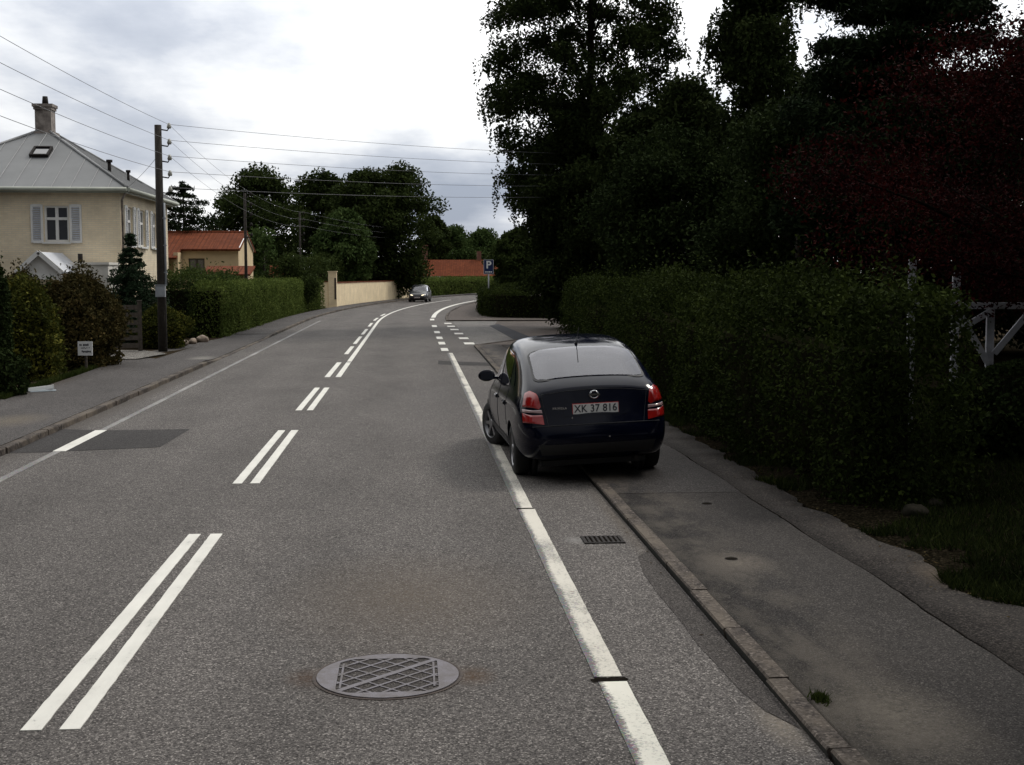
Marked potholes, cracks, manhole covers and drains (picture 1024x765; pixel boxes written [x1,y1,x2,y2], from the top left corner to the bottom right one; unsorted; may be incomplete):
manhole cover [312,653,463,700]
drain grate [580,535,626,544]
